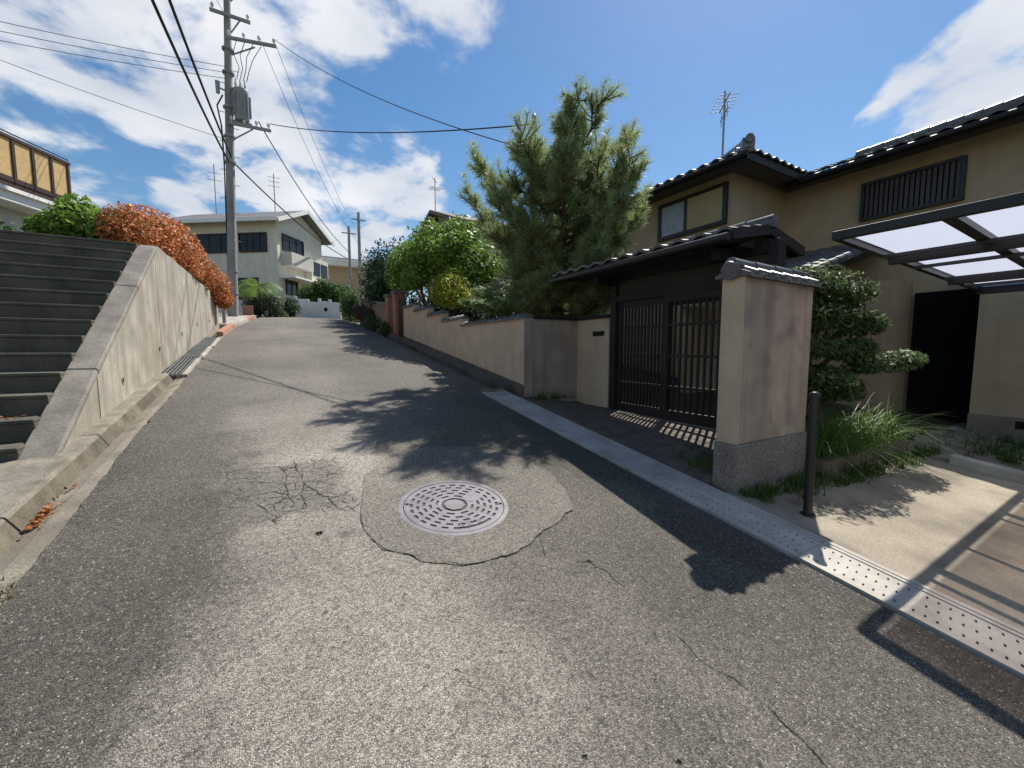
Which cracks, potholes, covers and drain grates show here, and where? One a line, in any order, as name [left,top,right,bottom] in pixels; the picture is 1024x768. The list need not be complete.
crack [677,635,828,768]
drain grate [180,346,213,360]
drain grate [195,337,221,347]
drain grate [159,357,201,381]
manhole cover [399,480,508,535]
crack [223,459,361,523]
